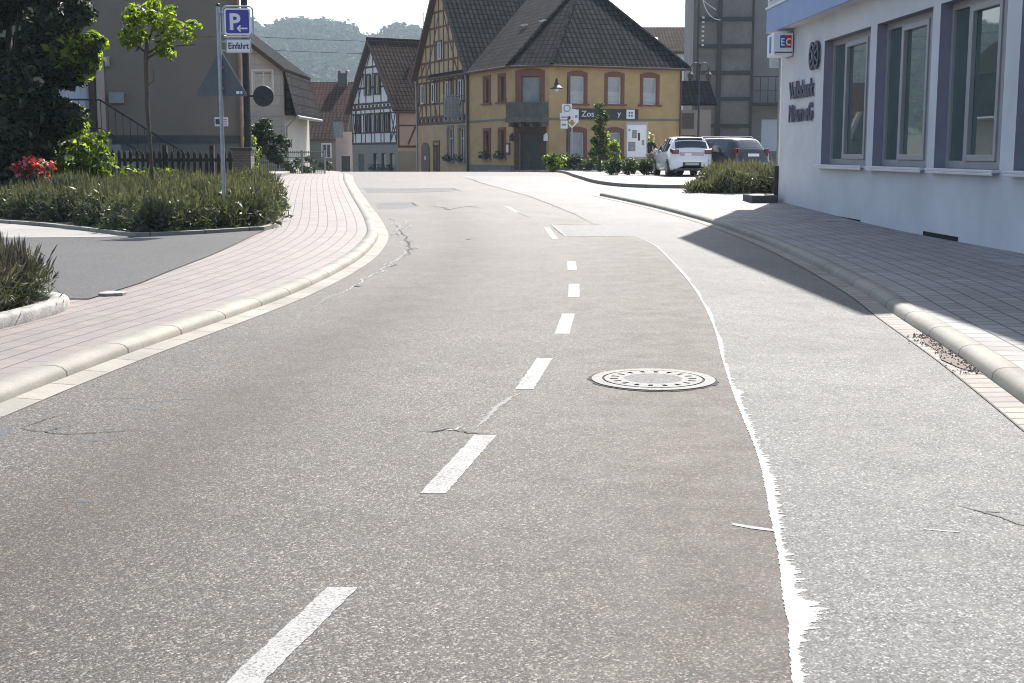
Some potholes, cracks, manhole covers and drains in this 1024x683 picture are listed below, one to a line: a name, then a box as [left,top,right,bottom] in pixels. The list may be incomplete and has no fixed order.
crack [949,503,1024,526]
manhole cover [587,368,719,392]
crack [24,414,149,434]
crack [300,188,480,313]
